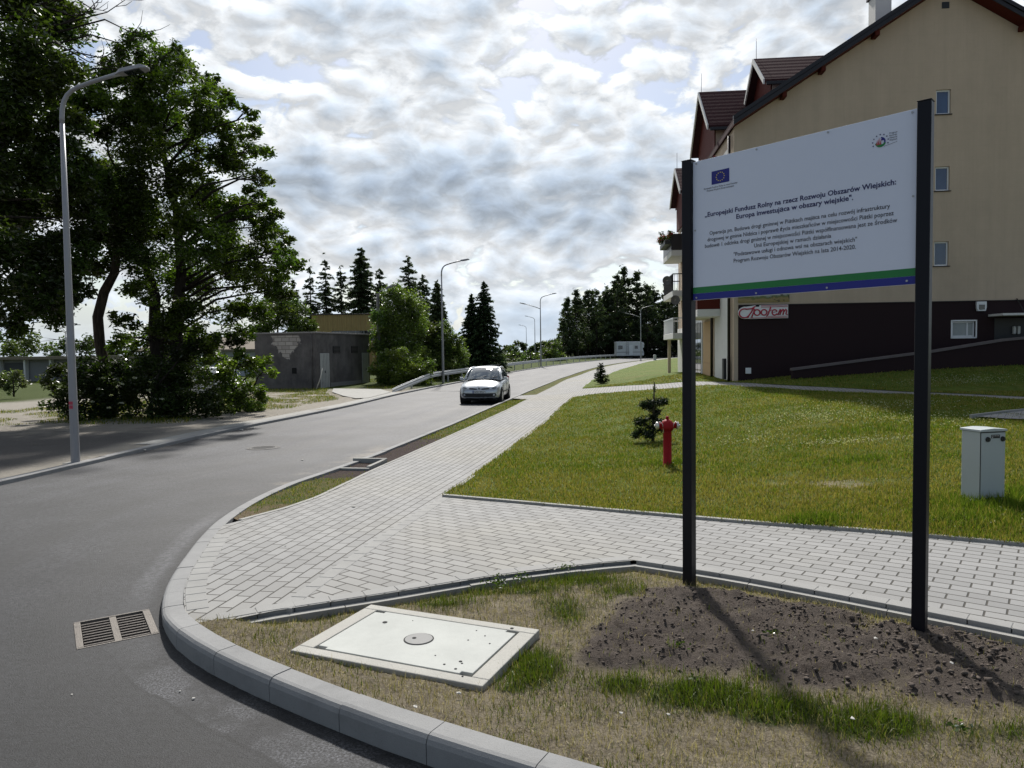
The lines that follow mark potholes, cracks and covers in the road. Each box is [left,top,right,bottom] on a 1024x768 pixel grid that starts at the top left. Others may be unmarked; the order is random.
drain grate [73,609,159,650]
utility cover [291,605,539,692]
drain grate [340,458,387,471]
